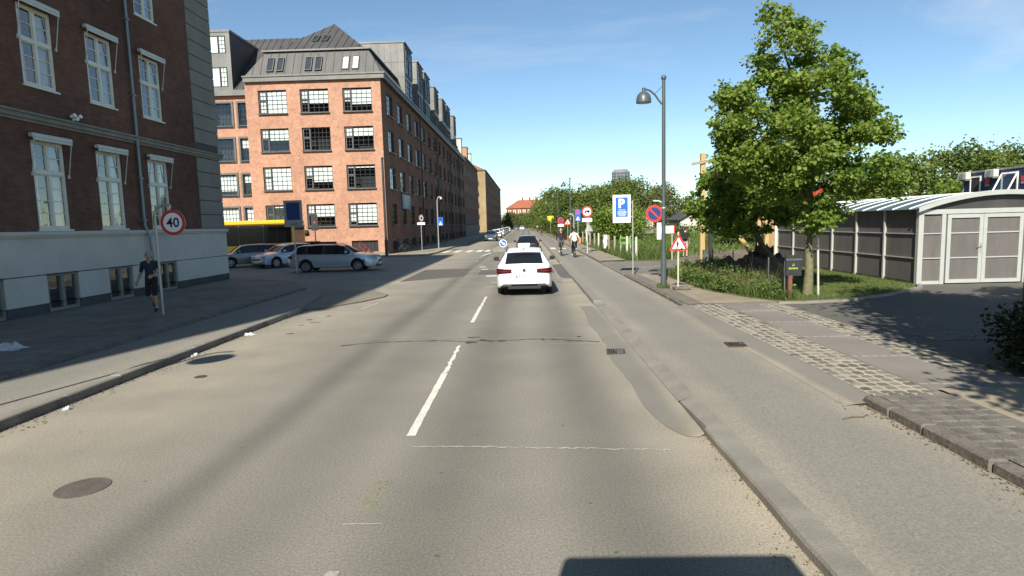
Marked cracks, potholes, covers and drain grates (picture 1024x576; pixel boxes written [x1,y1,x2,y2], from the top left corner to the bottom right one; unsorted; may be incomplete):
manhole cover [53,477,112,499]
